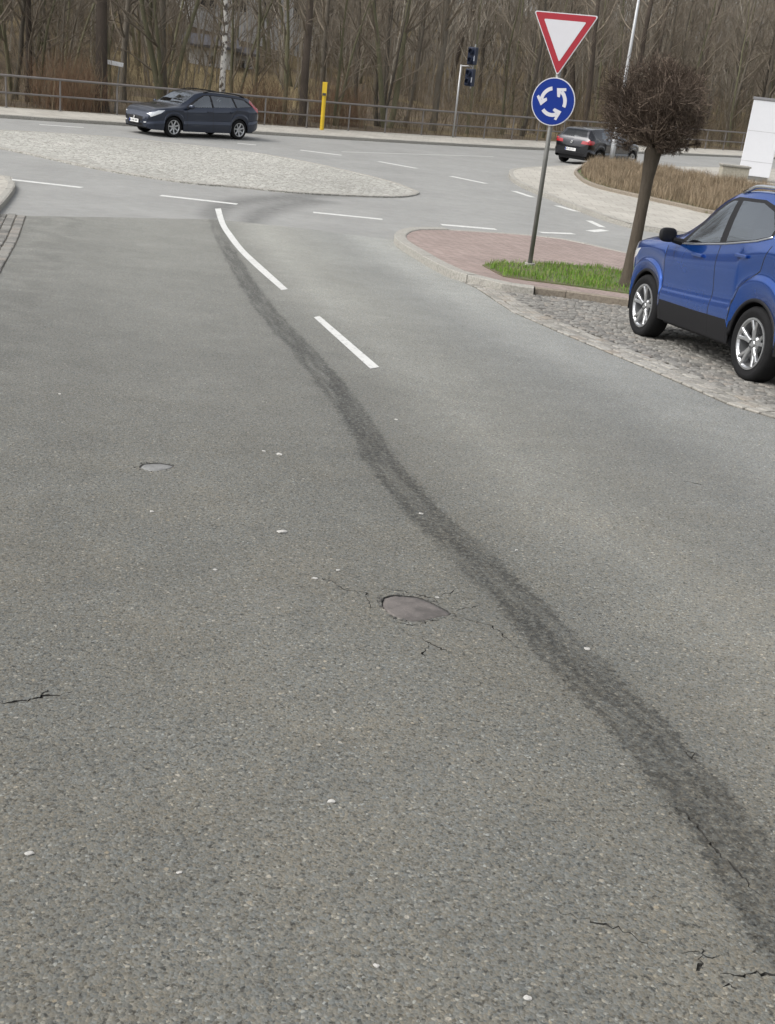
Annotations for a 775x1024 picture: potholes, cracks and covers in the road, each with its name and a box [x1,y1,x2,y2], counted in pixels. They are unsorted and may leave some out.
crack [552,907,664,955]
crack [661,795,762,897]
crack [299,574,513,660]
crack [682,949,775,988]
crack [1,690,73,704]
